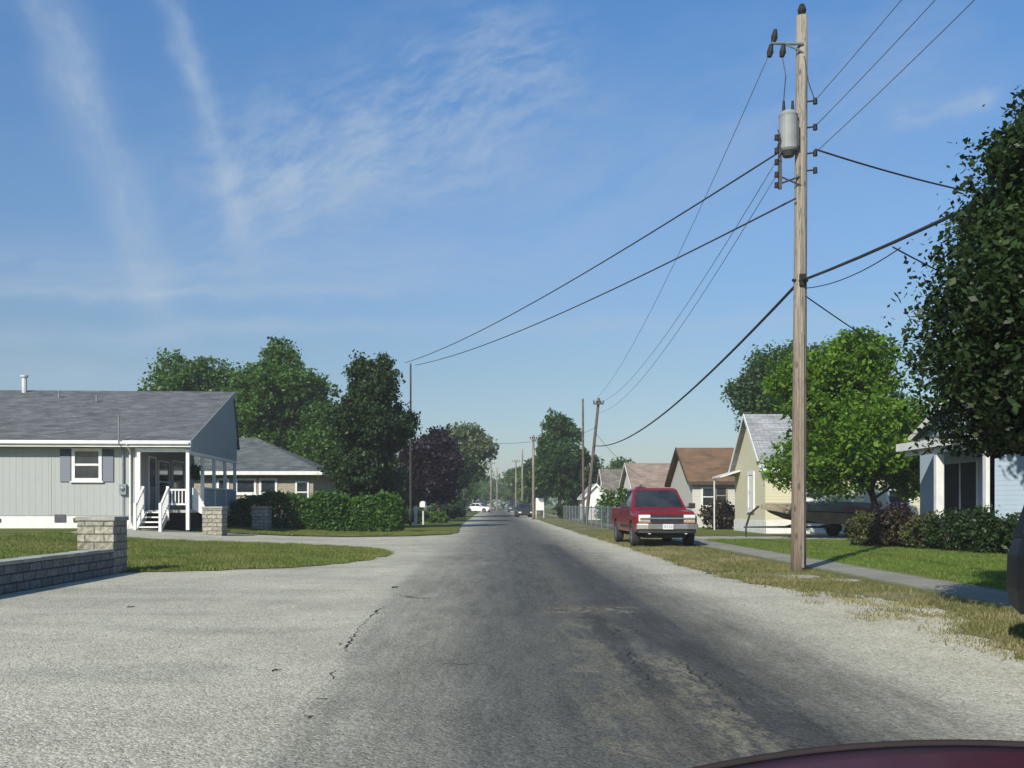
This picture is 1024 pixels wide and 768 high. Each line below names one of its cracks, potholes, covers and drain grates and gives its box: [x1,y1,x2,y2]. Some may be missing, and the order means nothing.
crack [339,607,385,652]
